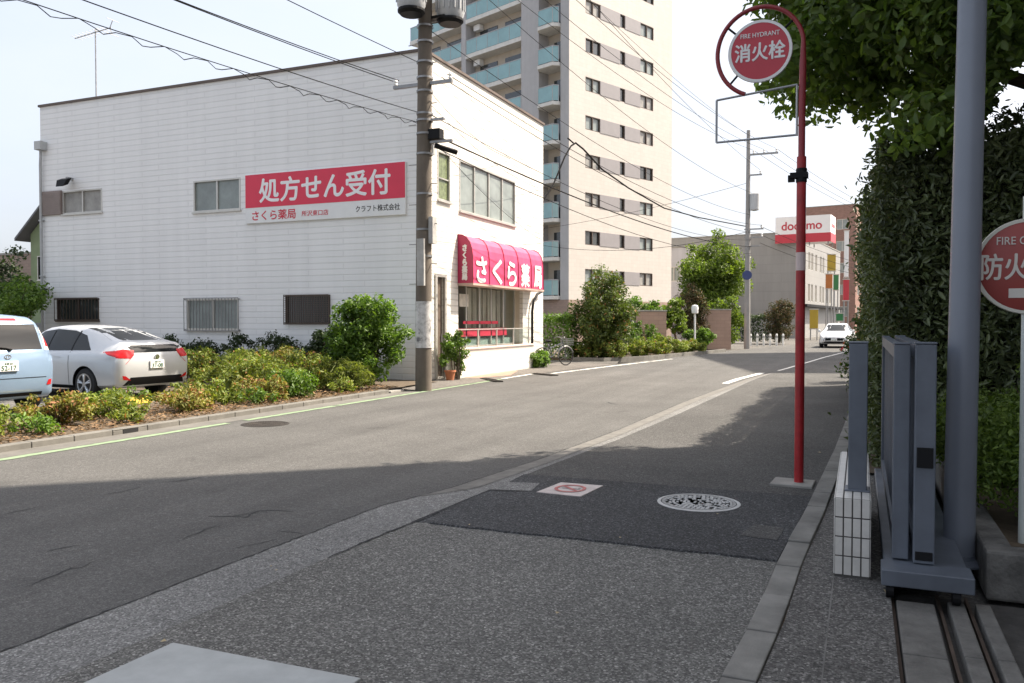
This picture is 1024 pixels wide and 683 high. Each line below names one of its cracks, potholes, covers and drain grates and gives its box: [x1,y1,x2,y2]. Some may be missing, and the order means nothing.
manhole cover [657,494,741,512]
crack [29,545,91,586]
crack [183,510,284,539]
crack [233,488,467,558]
